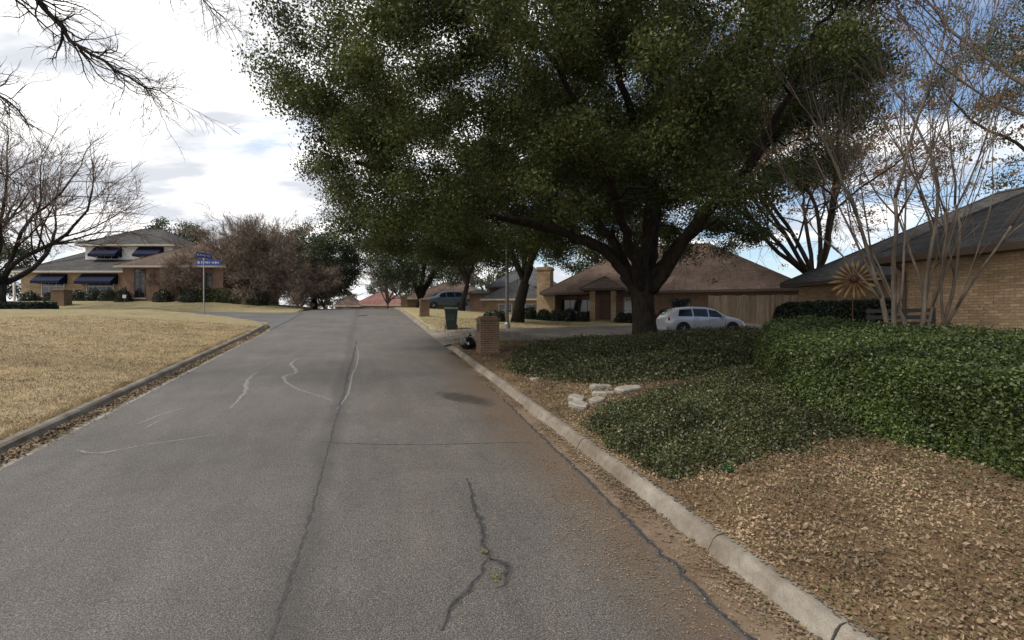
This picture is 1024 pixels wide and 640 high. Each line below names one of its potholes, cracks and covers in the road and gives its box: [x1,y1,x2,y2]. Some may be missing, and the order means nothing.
crack [331,384,759,640]
crack [282,344,359,409]
crack [230,372,257,408]
crack [76,407,215,453]
